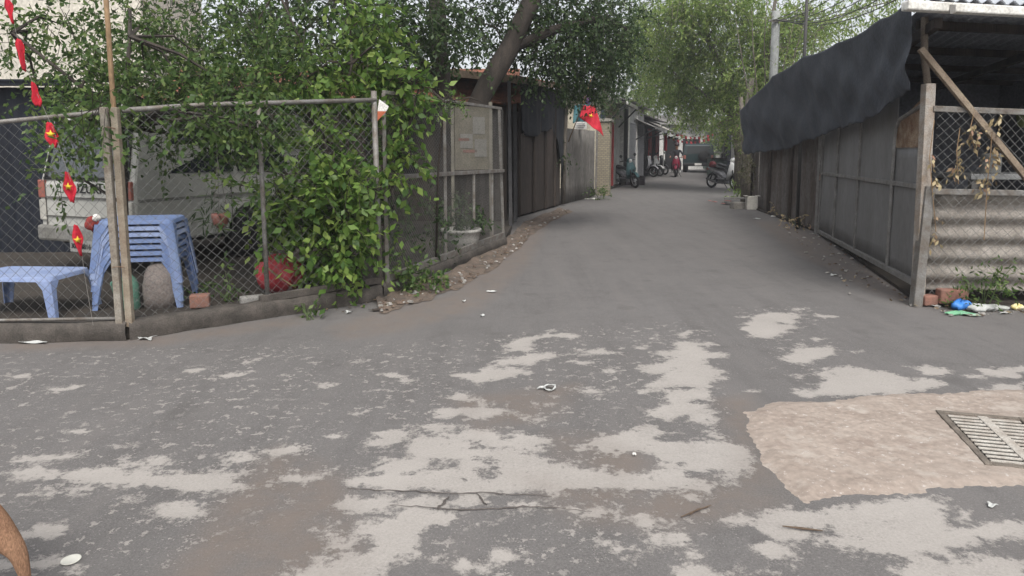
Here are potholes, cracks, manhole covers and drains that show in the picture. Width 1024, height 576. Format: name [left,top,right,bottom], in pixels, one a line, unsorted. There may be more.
drain grate [935,410,1024,469]
crack [348,488,592,512]
